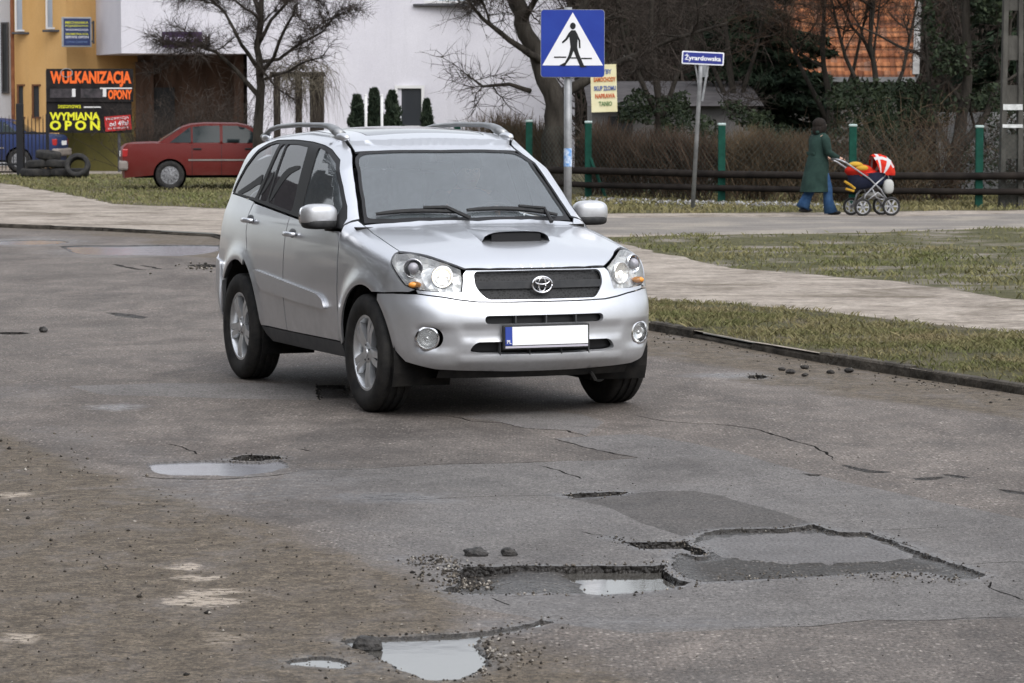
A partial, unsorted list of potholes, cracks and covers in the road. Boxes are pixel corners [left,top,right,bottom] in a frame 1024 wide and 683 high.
pothole [340,620,554,680]
pothole [285,656,350,669]
pothole [671,524,985,582]
pothole [59,245,220,256]
crack [636,415,834,461]
pothole [442,565,690,595]
crack [310,413,637,479]
pothole [146,460,289,476]
pothole [318,385,354,399]
